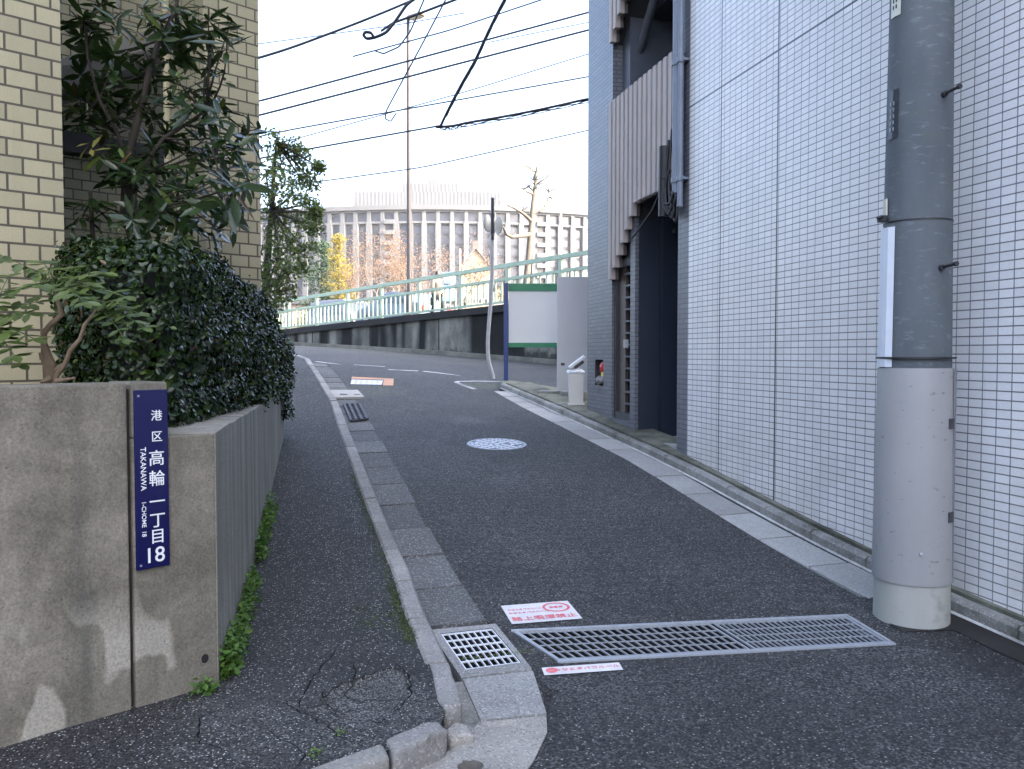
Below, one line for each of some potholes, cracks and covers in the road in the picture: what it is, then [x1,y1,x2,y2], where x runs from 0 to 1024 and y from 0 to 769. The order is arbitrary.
drain grate [510,614,896,700]
drain grate [343,403,369,422]
drain grate [432,624,532,682]
crack [269,649,399,765]
manhole cover [467,438,527,451]
